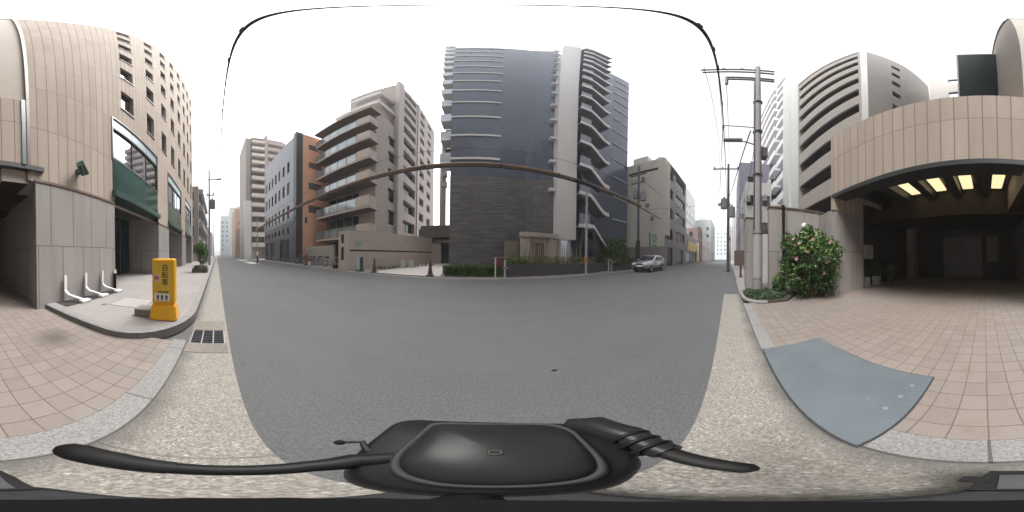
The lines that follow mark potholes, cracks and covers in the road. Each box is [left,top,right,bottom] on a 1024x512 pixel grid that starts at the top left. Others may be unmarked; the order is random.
drain grate [184,321,228,353]
